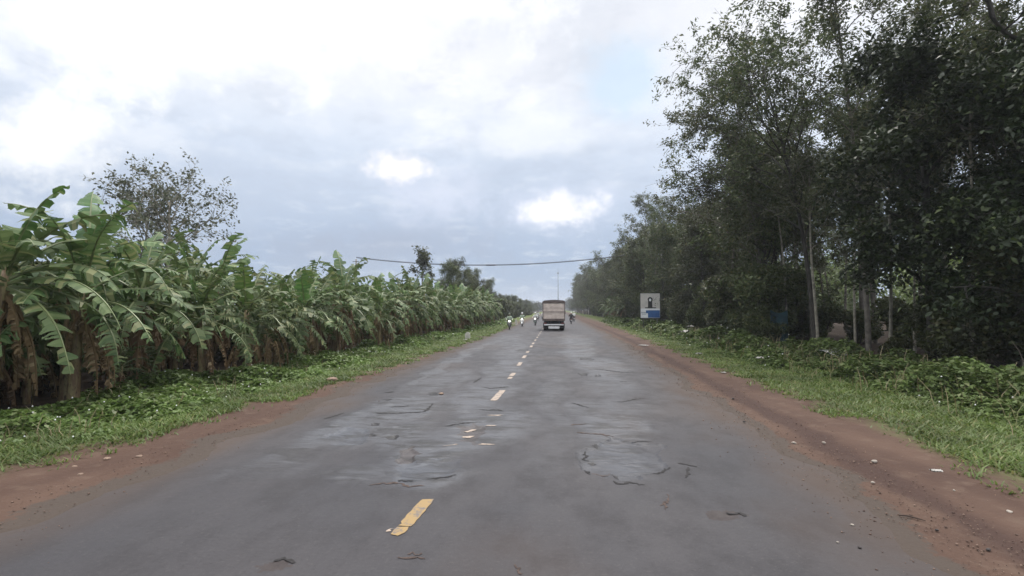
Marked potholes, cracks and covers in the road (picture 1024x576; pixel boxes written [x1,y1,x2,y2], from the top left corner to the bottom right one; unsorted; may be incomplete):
pothole [395,446,422,464]
crack [572,403,697,485]
crack [372,474,456,487]
pothole [705,510,749,521]
pothole [574,436,669,481]
